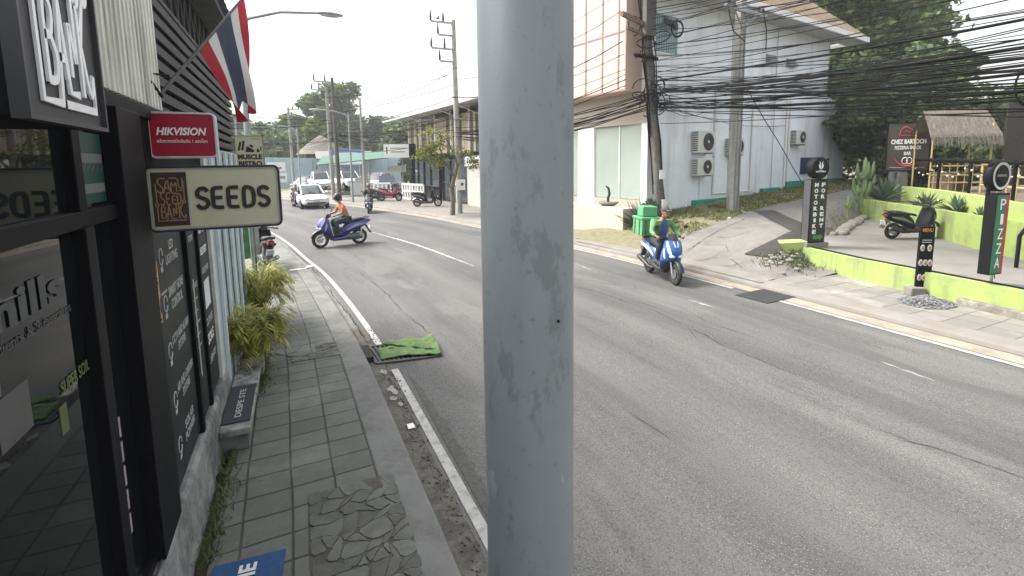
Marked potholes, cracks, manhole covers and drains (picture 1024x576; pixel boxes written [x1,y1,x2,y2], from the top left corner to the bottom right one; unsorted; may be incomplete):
crack [887,432,1021,477]
drain grate [361,344,443,365]
